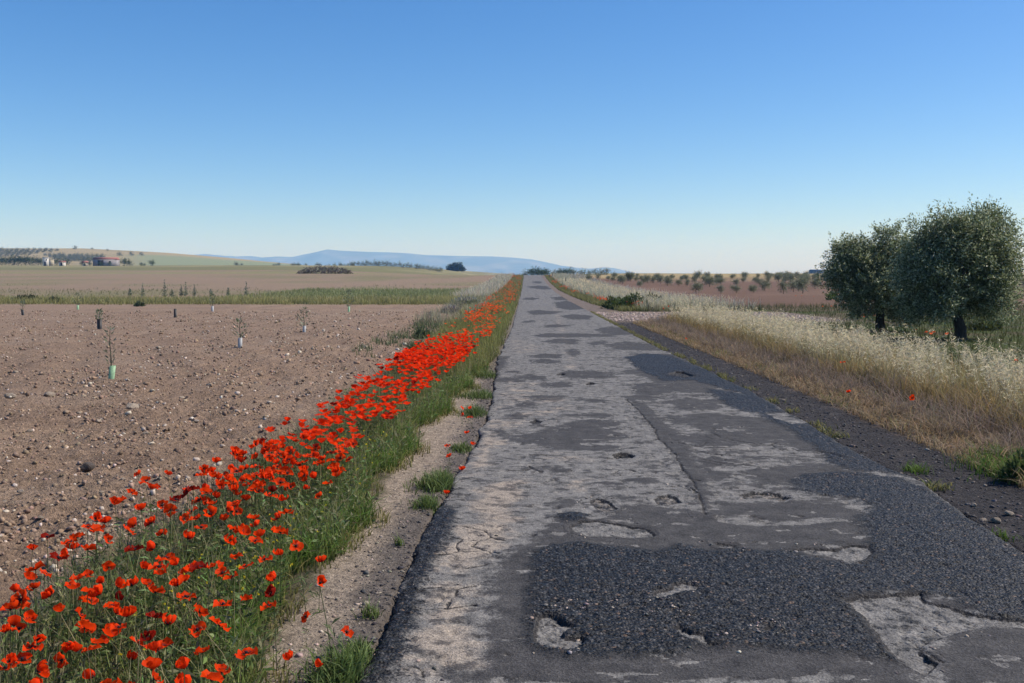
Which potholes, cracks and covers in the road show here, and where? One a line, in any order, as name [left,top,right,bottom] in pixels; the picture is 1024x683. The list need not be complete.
pothole [581,496,627,514]
pothole [602,450,645,461]
pothole [730,490,803,503]
crack [904,622,954,667]
crack [408,525,513,613]
pothole [645,492,687,507]
pothole [526,610,593,650]
